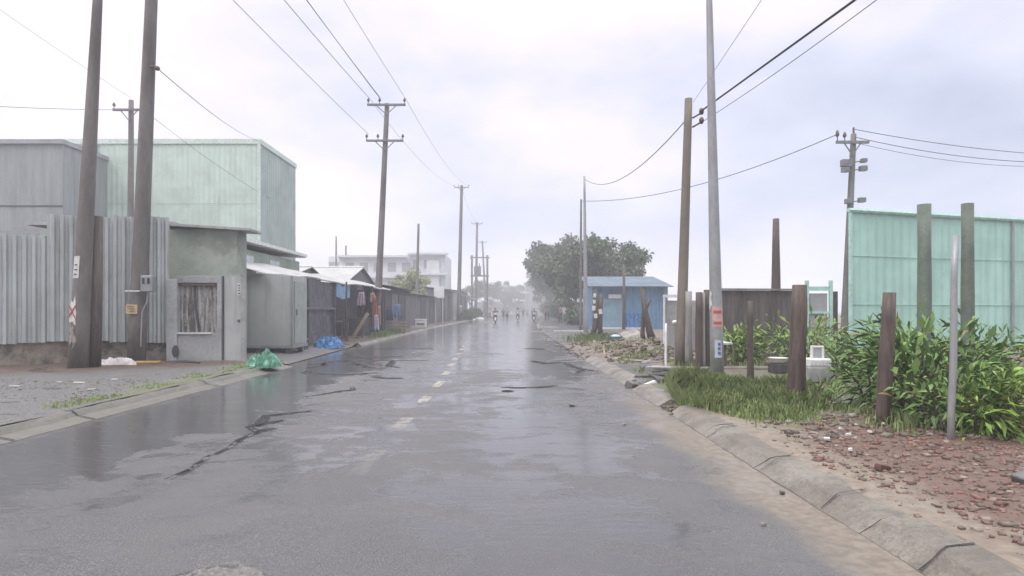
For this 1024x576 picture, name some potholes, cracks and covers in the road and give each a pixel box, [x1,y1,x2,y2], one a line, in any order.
crack [501,348,596,388]
crack [166,348,429,479]
